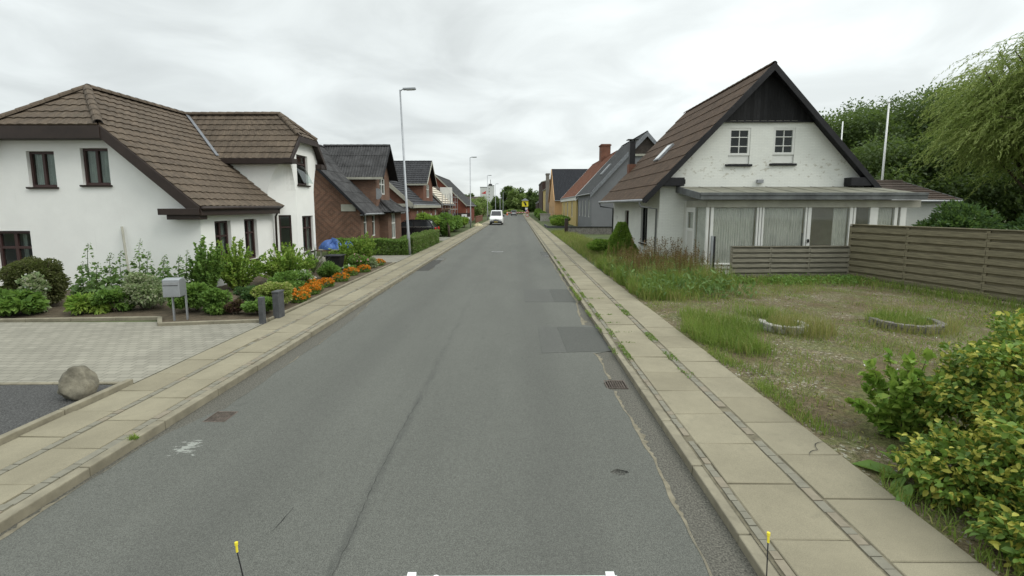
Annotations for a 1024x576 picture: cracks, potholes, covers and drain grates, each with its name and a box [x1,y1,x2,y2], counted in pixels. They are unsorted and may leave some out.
drain grate [202,411,239,422]
drain grate [603,380,629,389]
